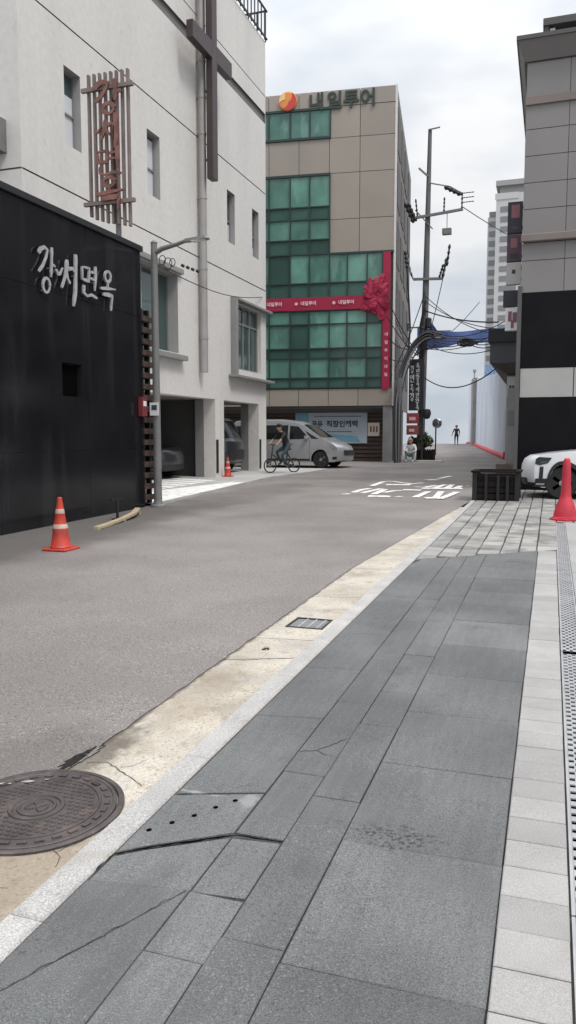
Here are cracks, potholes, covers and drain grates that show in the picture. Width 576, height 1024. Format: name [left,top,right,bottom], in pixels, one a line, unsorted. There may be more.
drain grate [285,617,333,641]
manhole cover [0,769,125,856]
crack [95,835,282,870]
crack [0,891,184,991]
